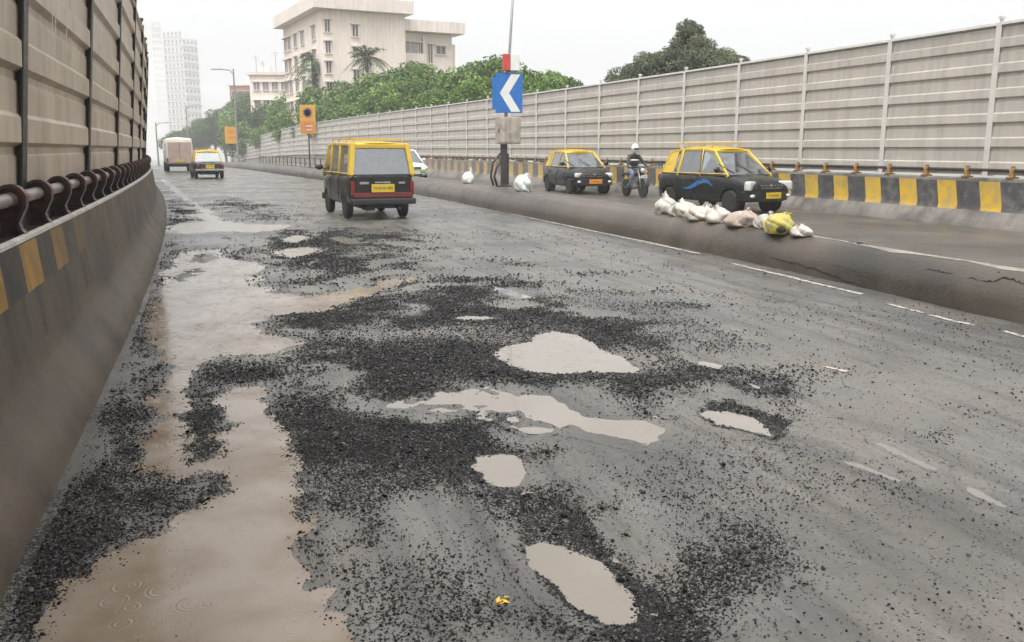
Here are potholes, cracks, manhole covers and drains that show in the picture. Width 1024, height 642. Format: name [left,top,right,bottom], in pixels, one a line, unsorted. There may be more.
pothole [378,382,572,437]
pothole [494,480,688,642]
pothole [463,323,672,380]
pothole [680,391,813,444]
crack [926,269,1023,284]
